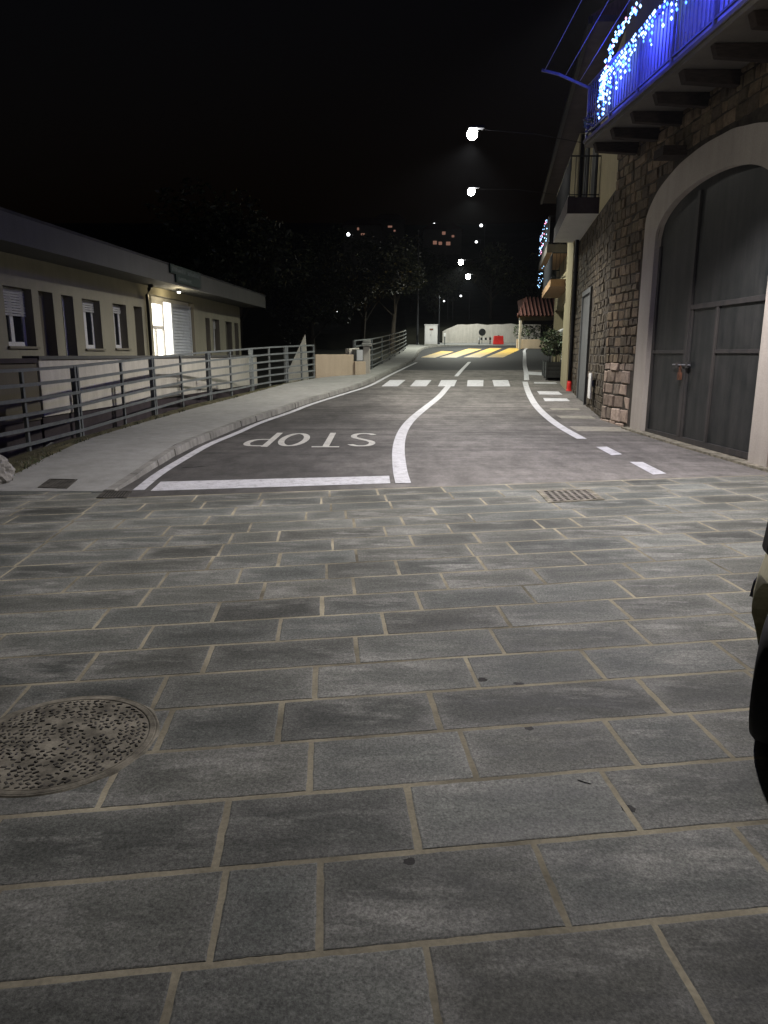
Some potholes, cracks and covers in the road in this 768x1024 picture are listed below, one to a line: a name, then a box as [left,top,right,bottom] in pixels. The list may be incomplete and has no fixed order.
drain grate [96,490,132,499]
drain grate [536,489,605,503]
manhole cover [0,696,161,798]
drain grate [38,479,77,489]
